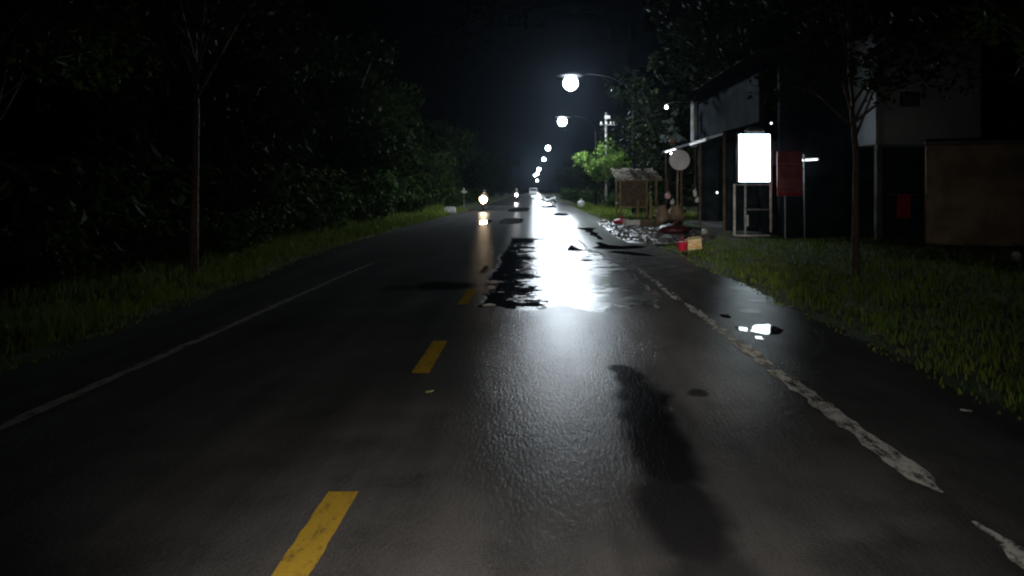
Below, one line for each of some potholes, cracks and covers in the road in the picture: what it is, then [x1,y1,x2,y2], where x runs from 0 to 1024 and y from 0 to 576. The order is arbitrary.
pothole [474,237,663,312]
